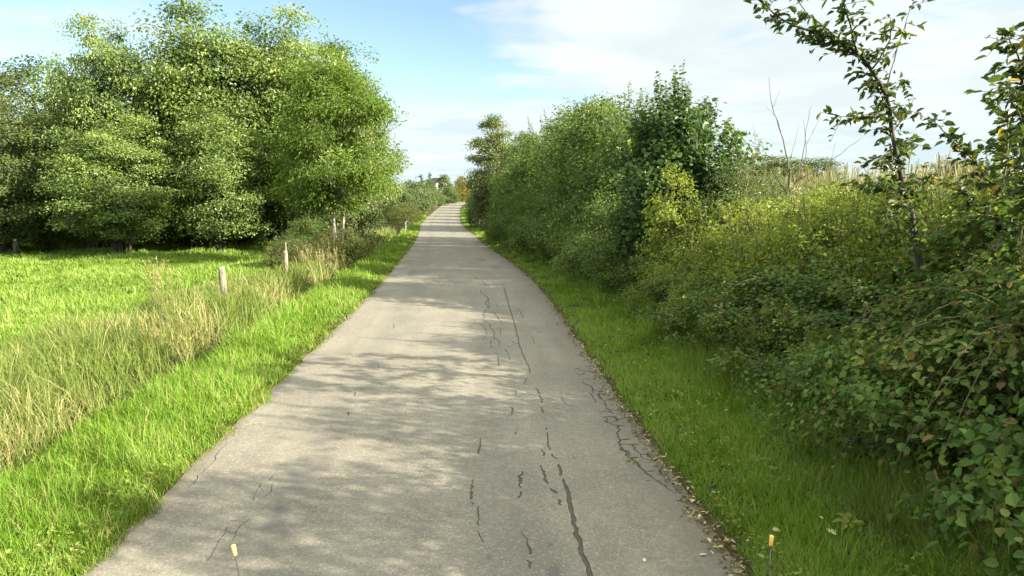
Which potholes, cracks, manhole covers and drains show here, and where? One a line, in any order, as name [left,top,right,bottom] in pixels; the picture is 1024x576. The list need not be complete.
crack [470,479,484,543]
crack [207,475,274,560]
crack [561,368,675,493]
crack [475,277,593,576]
